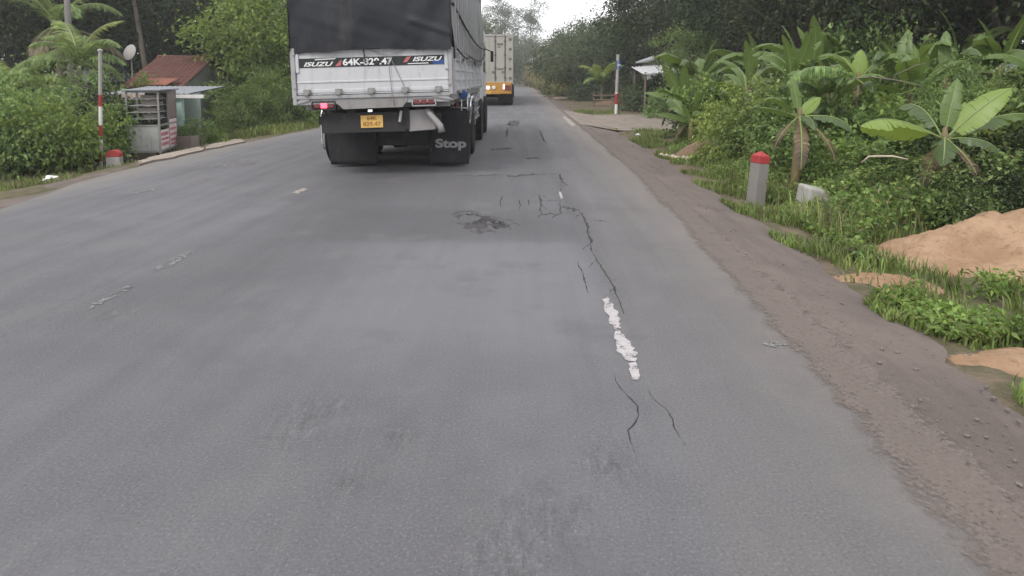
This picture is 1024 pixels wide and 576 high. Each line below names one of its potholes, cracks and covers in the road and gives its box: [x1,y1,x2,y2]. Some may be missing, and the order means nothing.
pothole [453,211,519,235]
crack [500,175,624,314]
crack [615,377,680,450]
